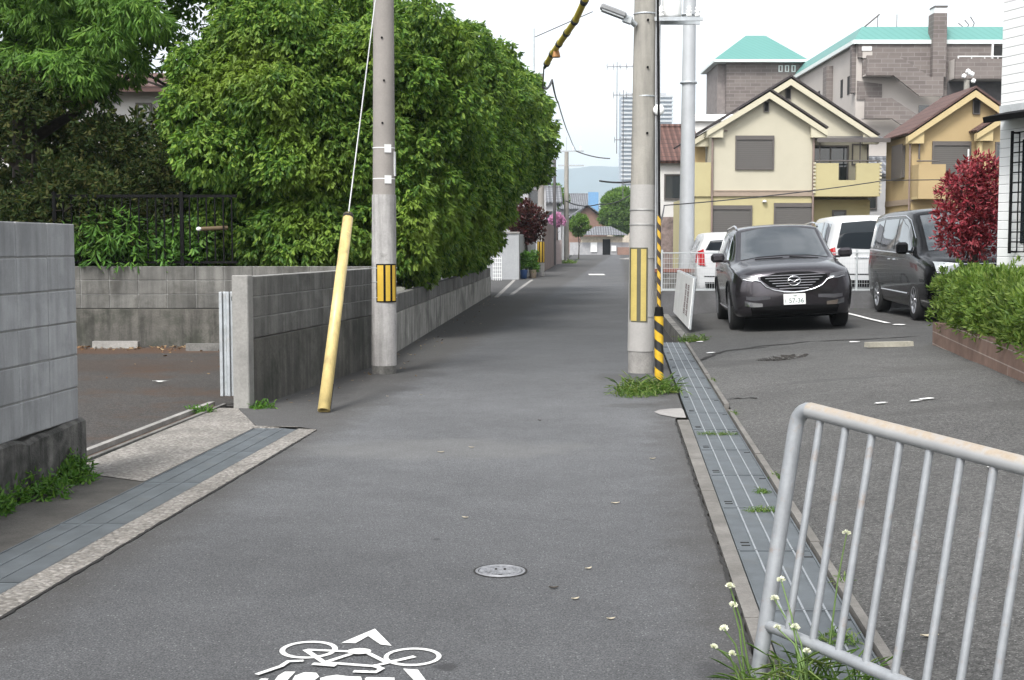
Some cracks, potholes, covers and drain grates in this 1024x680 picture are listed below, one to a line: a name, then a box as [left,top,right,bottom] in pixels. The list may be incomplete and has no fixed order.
drain grate [710,474,777,509]
drain grate [60,483,199,524]
drain grate [700,449,764,476]
drain grate [678,387,718,402]
drain grate [206,428,298,452]
drain grate [673,377,711,387]
drain grate [0,583,19,594]
drain grate [771,610,881,680]
drain grate [670,368,705,377]
drain grate [738,550,842,612]
drain grate [722,507,811,552]
drain grate [667,360,700,369]
